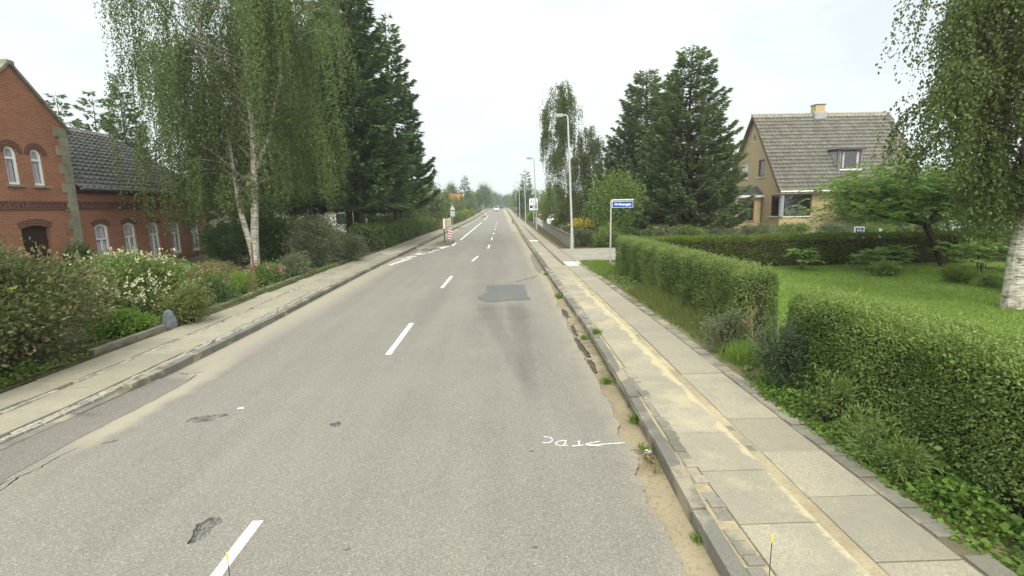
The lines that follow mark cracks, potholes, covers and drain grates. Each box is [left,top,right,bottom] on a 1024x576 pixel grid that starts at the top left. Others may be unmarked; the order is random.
crack [0,447,78,491]
pothole [186,414,229,423]
pothole [187,517,222,544]
pothole [574,338,591,358]
